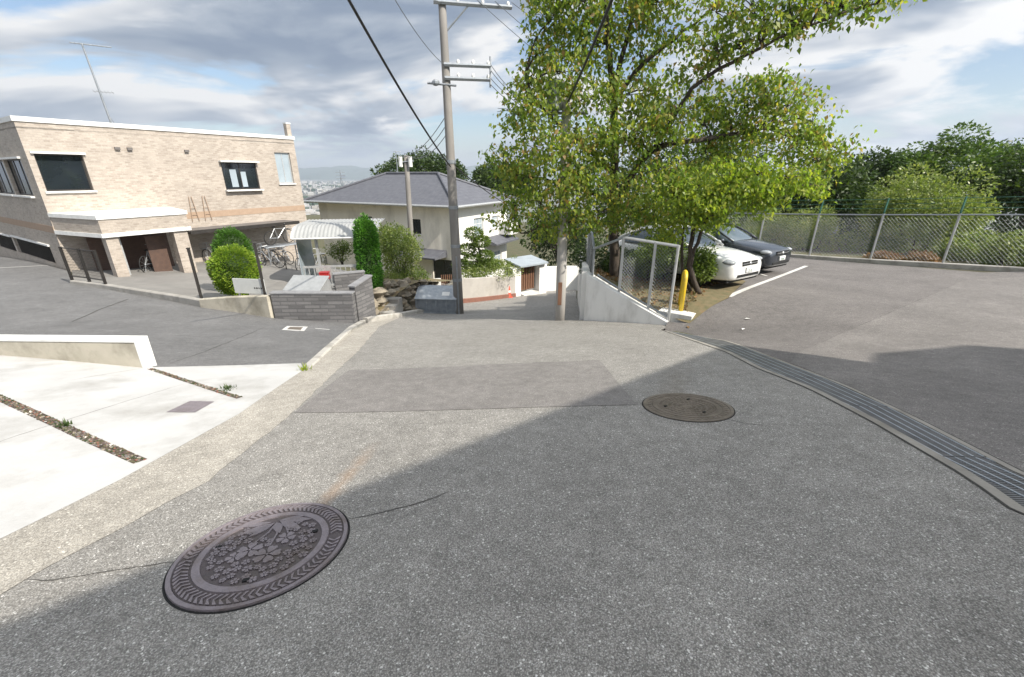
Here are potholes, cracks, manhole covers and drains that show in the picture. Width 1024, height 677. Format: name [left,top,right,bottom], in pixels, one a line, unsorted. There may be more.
crack [24,562,166,581]
manhole cover [162,503,350,614]
crack [349,489,454,519]
manhole cover [642,393,736,423]
